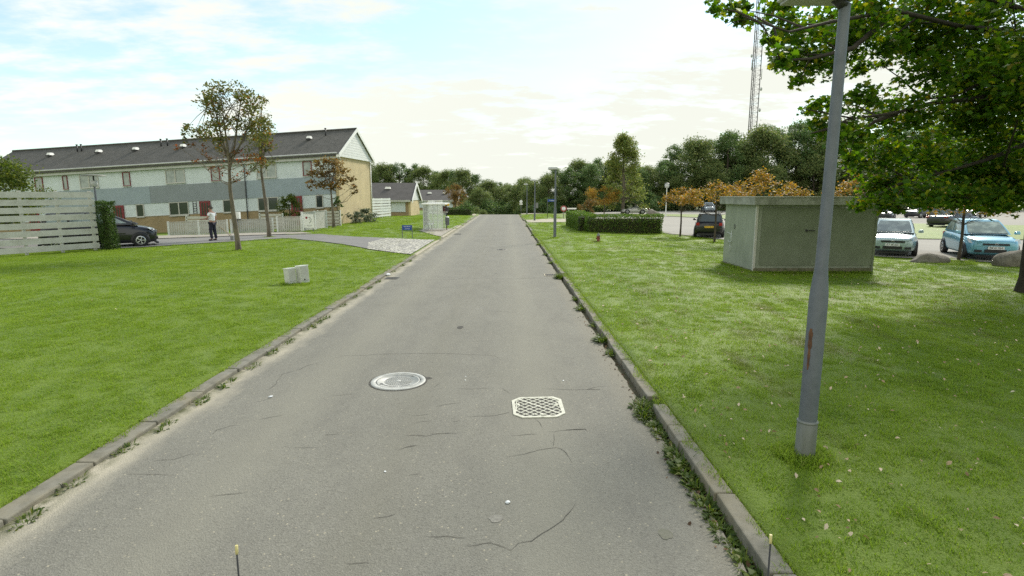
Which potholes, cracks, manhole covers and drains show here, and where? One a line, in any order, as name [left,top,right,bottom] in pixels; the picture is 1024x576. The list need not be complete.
drain grate [512,396,565,418]
crack [431,504,575,550]
manhole cover [369,372,427,391]
